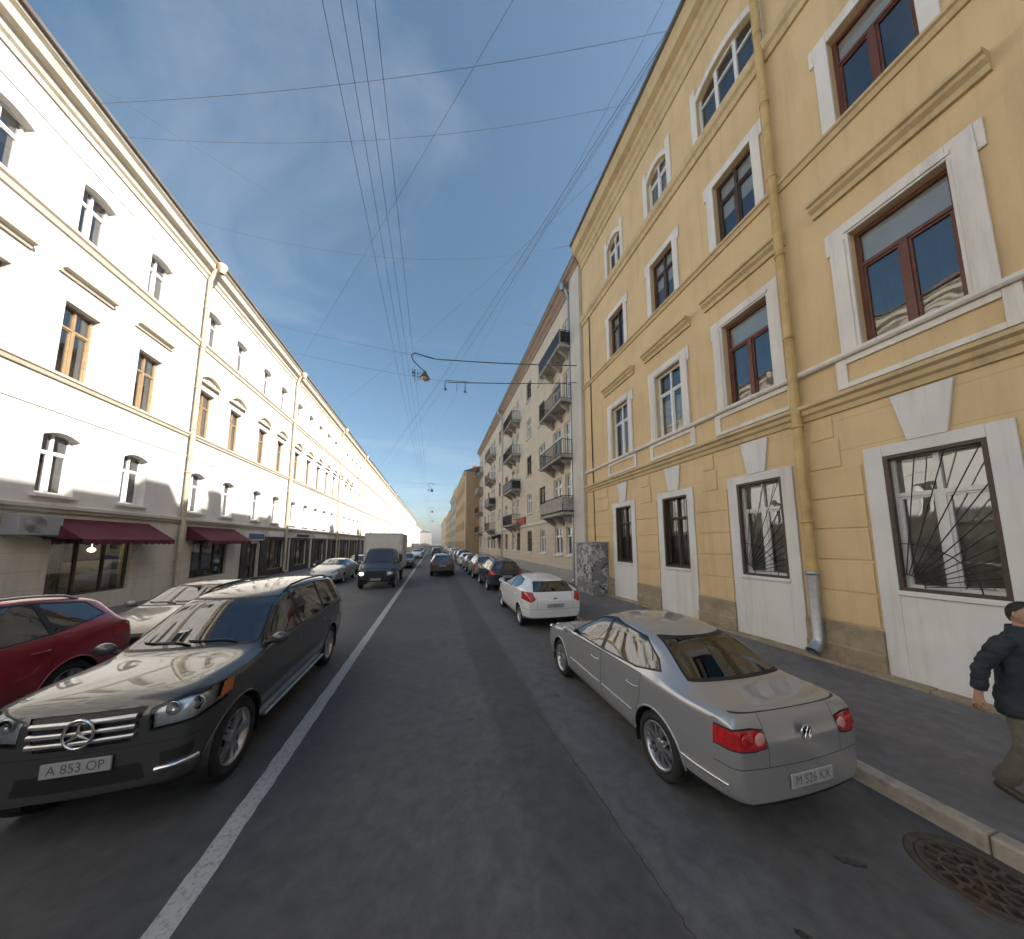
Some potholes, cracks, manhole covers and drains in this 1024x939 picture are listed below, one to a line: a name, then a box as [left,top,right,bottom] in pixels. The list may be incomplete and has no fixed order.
crack [539,715,697,939]
manhole cover [902,832,1024,931]
